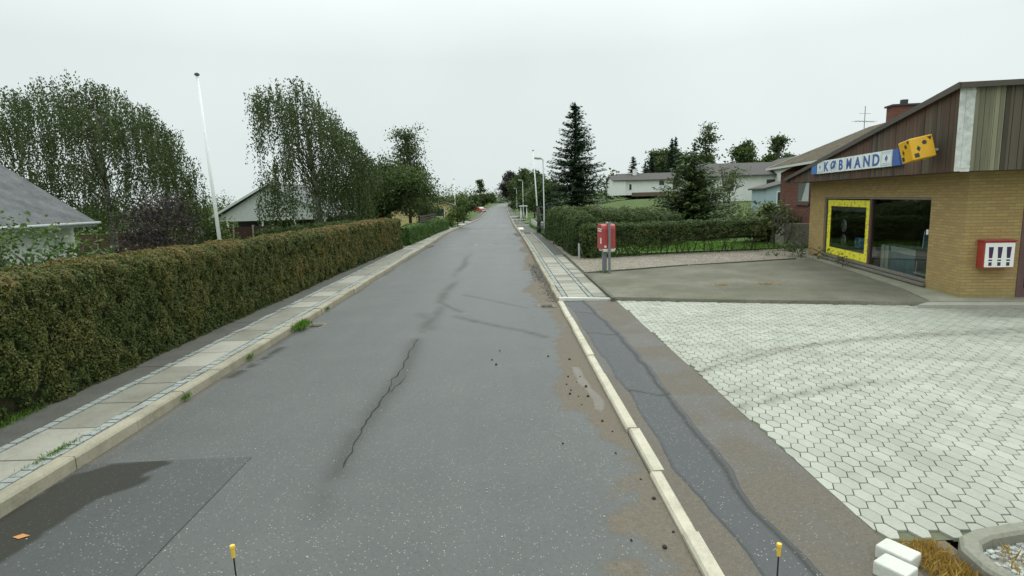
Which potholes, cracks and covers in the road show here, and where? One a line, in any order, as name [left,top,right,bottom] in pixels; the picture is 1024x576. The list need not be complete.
crack [343,339,418,467]
